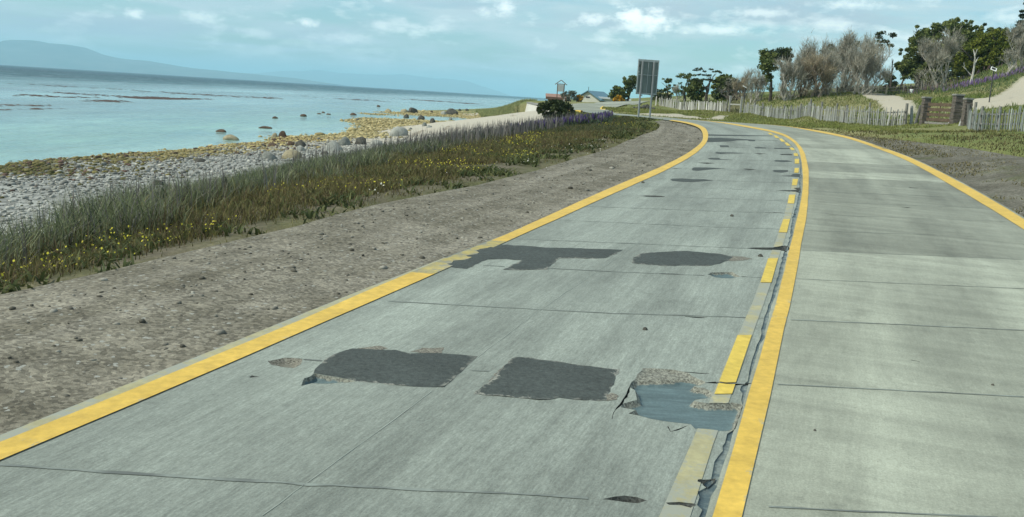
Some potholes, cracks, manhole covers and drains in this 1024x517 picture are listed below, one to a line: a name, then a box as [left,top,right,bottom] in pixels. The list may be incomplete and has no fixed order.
pothole [621,368,743,431]
crack [688,372,752,386]
